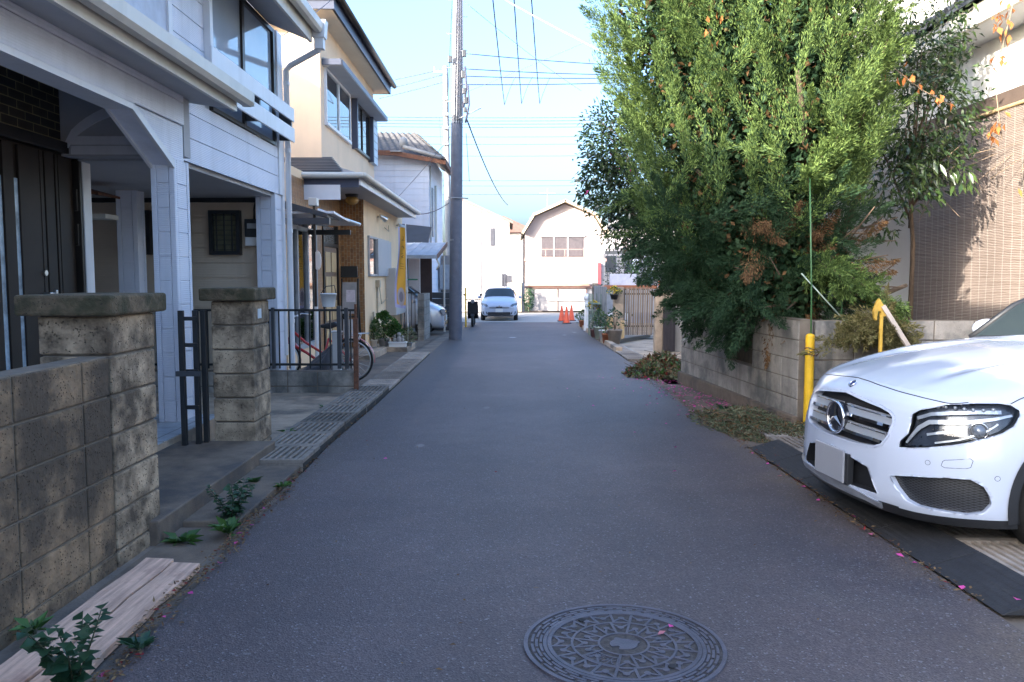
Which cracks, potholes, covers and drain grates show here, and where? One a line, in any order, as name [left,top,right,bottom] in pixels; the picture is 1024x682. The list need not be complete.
manhole cover [524,604,727,682]
